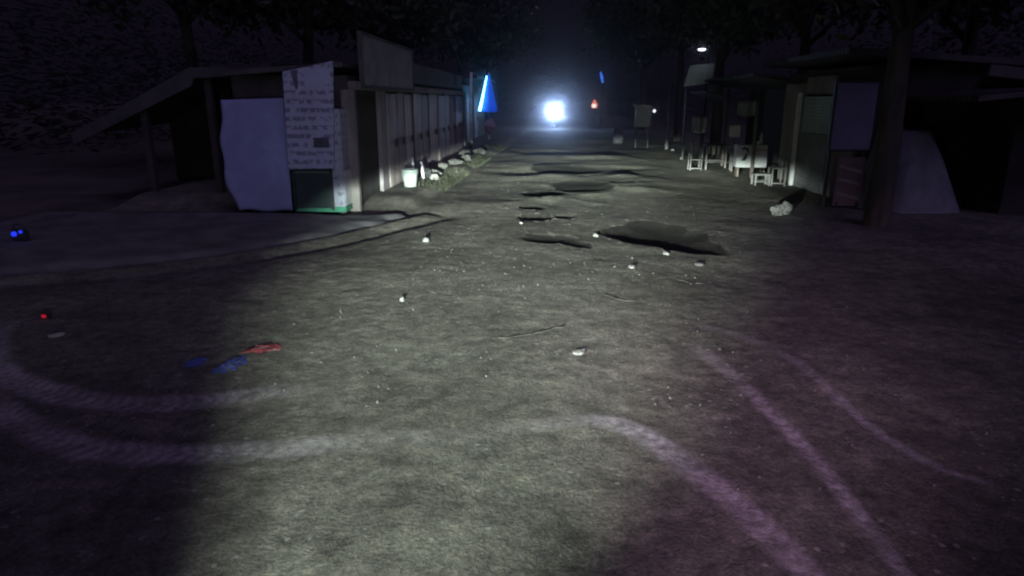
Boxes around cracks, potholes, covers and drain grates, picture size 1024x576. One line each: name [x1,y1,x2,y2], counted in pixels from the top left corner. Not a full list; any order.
pothole [545,180,620,193]
pothole [592,219,733,258]
crack [605,293,634,301]
pothole [516,233,596,250]
pothole [527,164,609,175]
crack [498,323,570,338]
pothole [514,213,556,222]
pothole [519,190,567,198]
